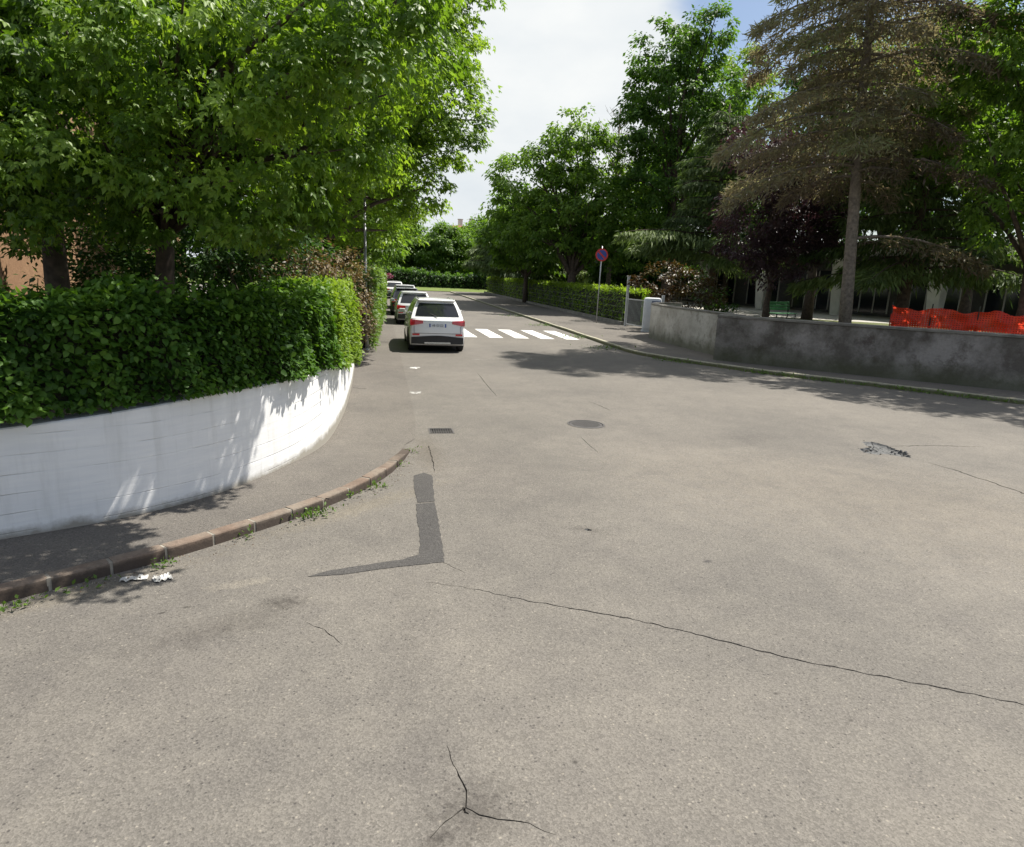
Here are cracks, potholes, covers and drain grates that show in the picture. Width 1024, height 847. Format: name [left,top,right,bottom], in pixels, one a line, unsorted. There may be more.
crack [437,562,1023,705]
pothole [858,440,911,458]
crack [430,747,555,838]
crack [912,445,1024,494]
manhole cover [567,420,605,429]
